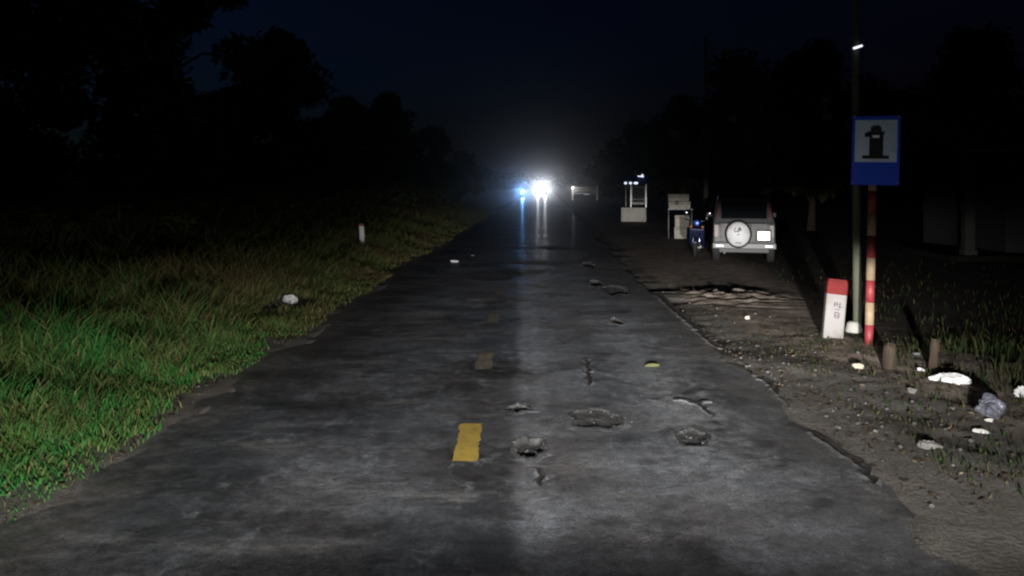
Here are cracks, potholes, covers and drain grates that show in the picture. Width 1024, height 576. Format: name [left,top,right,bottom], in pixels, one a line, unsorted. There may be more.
pothole [666,425,720,451]
crack [581,358,595,385]
crack [532,467,551,486]
pothole [597,284,634,297]
pothole [497,401,540,415]
pothole [604,316,630,326]
pothole [577,261,601,269]
pothole [561,405,632,432]
crack [806,431,883,485]
pothole [584,279,609,288]
pothole [501,433,559,463]
crack [673,399,717,416]
